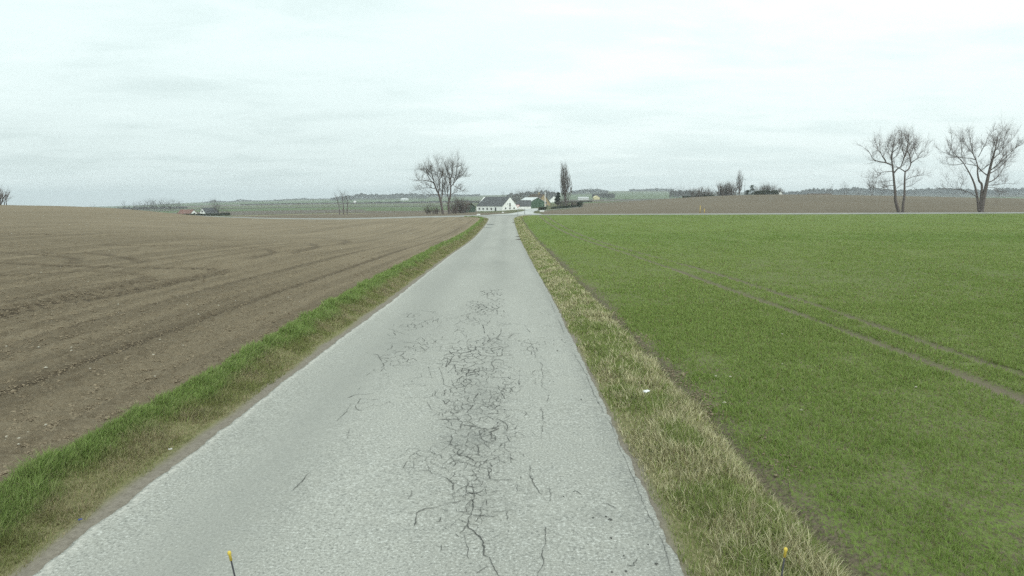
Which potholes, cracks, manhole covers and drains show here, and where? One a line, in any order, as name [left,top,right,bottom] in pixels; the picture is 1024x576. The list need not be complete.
crack [357,289,552,575]
